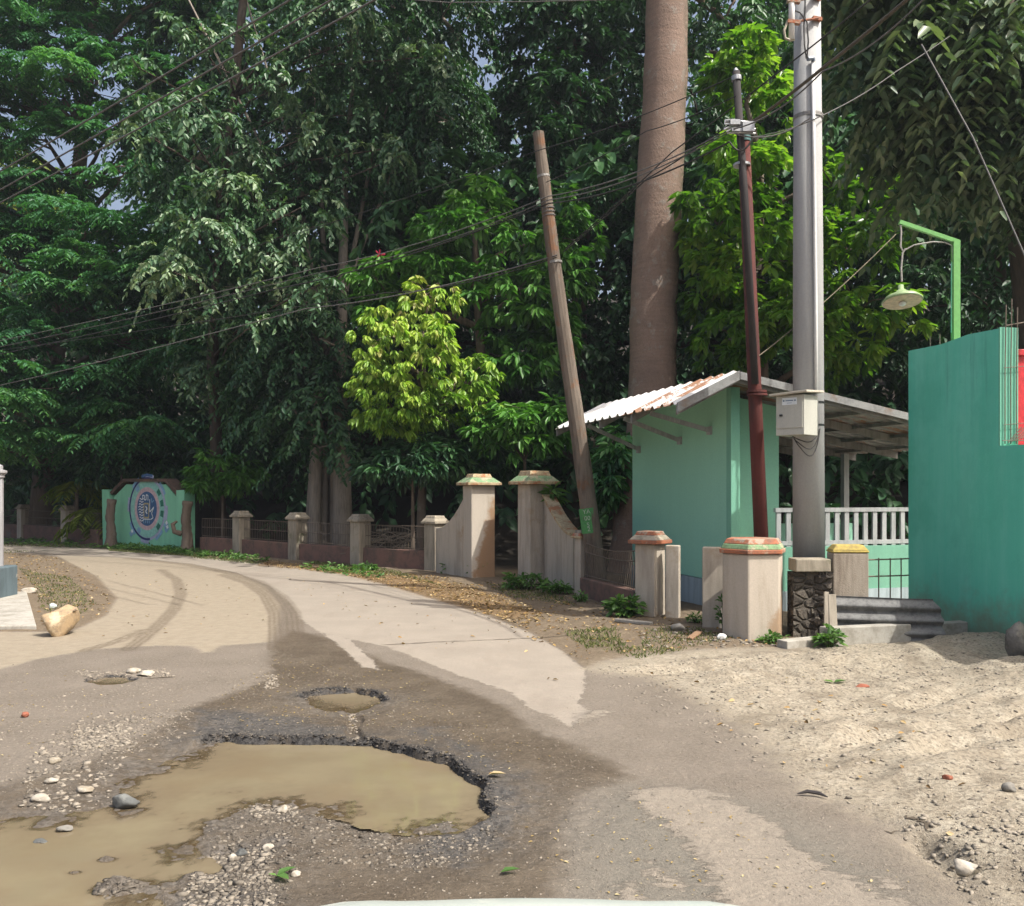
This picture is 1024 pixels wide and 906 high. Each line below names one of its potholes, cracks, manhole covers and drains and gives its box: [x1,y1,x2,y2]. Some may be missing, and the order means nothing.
pothole [0,733,497,906]
pothole [298,688,387,714]
pothole [83,674,141,686]
